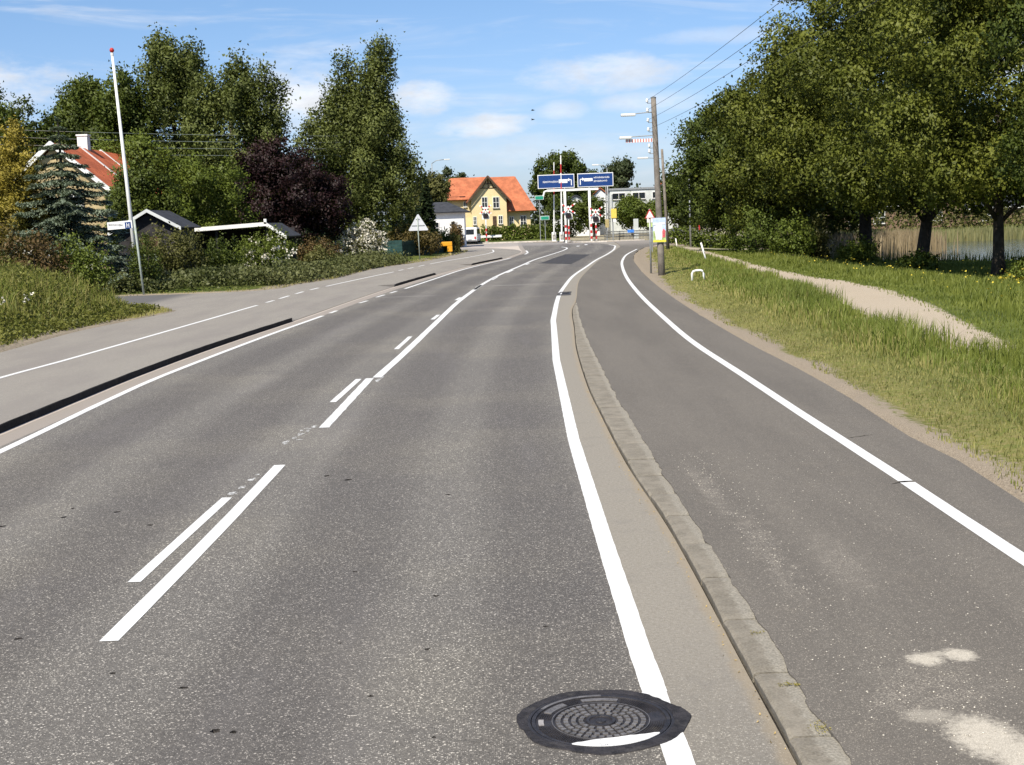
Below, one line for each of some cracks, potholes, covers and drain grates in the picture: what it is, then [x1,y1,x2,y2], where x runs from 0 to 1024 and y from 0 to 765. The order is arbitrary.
manhole cover [517,690,692,756]
